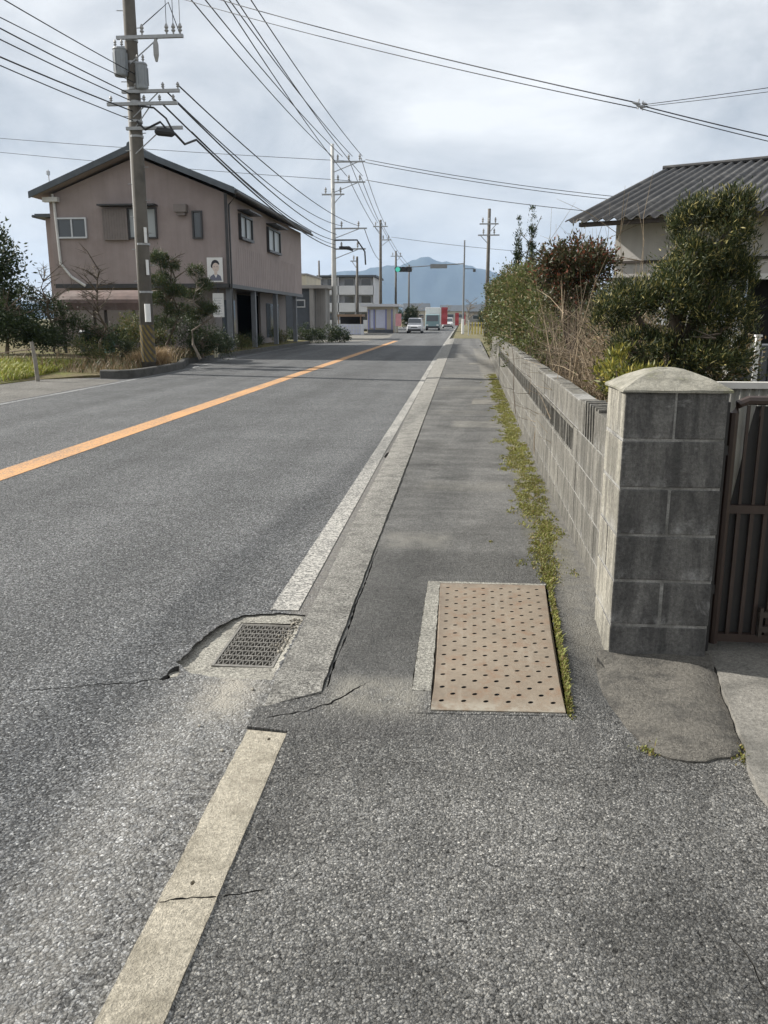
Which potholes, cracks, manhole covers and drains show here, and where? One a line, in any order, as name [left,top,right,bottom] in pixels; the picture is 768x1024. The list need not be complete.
crack [159,889,265,903]
crack [262,549,378,719]
drain grate [211,623,295,668]
manhole cover [408,581,569,717]
crack [13,678,157,692]
crack [722,926,768,991]
